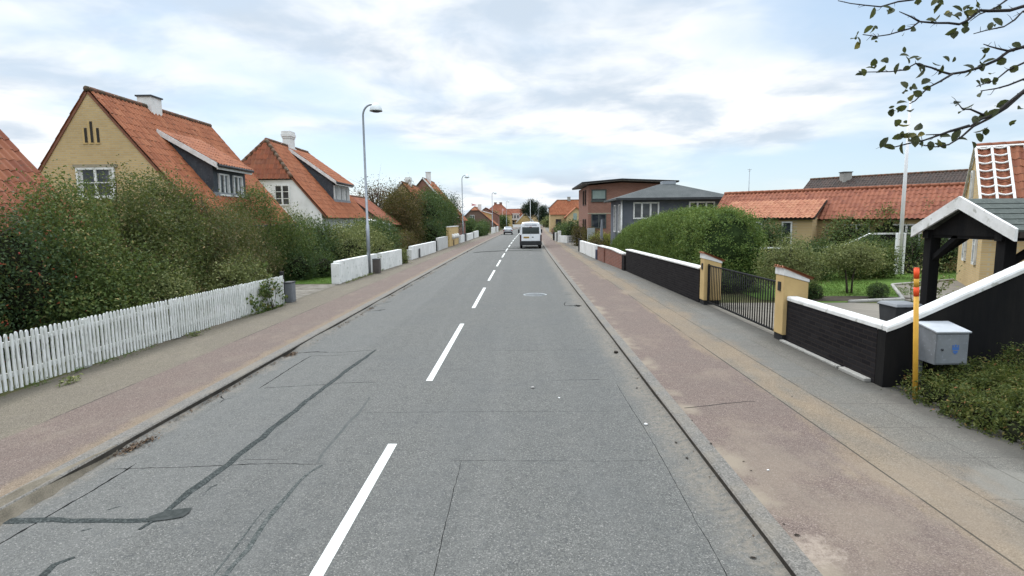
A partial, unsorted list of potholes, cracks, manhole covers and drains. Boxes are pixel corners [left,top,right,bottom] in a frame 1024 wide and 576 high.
crack [0,459,324,544]
crack [260,350,366,388]
